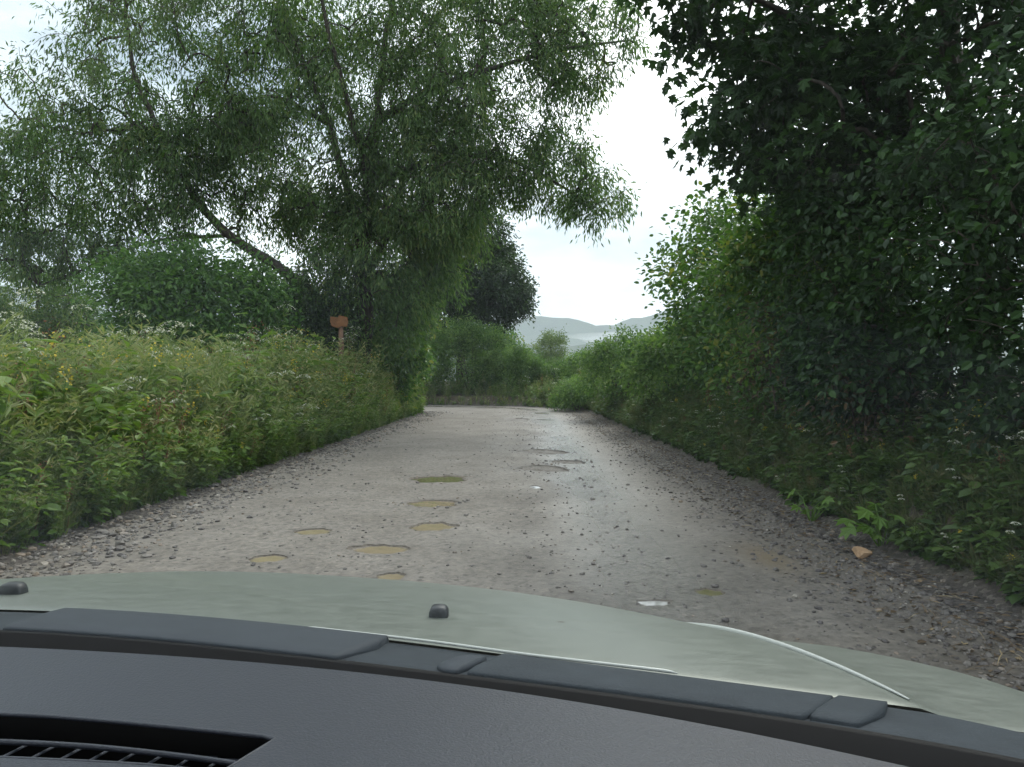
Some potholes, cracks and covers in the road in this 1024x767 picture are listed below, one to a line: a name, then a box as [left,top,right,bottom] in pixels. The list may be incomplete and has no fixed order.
pothole [248,554,289,562]
pothole [346,544,411,554]
pothole [694,587,725,596]
pothole [409,475,468,483]
pothole [409,522,460,531]
pothole [376,572,407,580]
